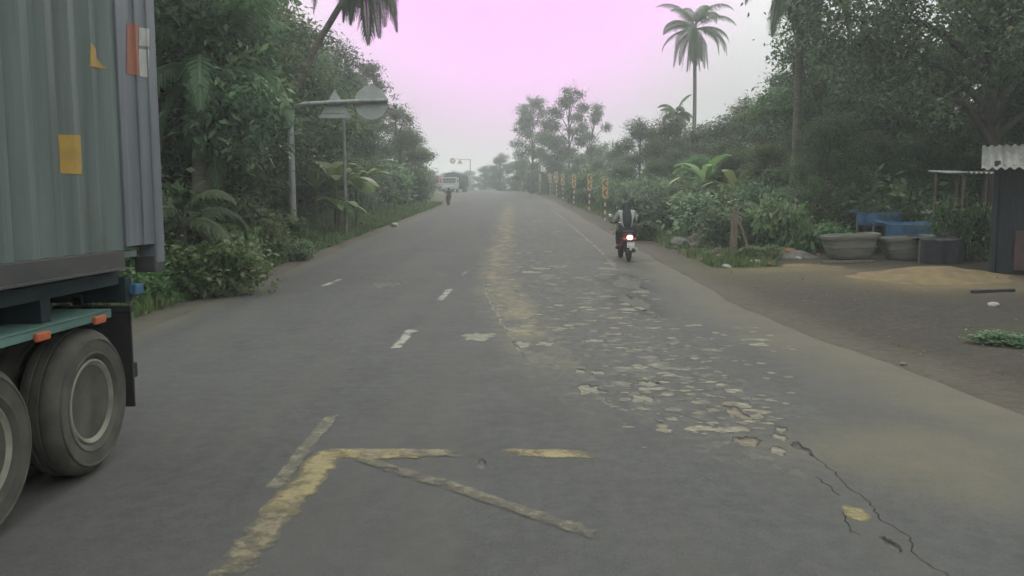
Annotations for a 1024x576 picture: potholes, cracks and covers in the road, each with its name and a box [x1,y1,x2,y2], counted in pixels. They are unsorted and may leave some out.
crack [809,453,950,576]
crack [482,214,796,448]
pothole [731,436,762,447]
pothole [766,446,787,456]
pothole [629,394,658,402]
pothole [575,383,609,395]
pothole [607,275,650,291]
pothole [723,405,751,417]
pothole [615,293,656,316]
